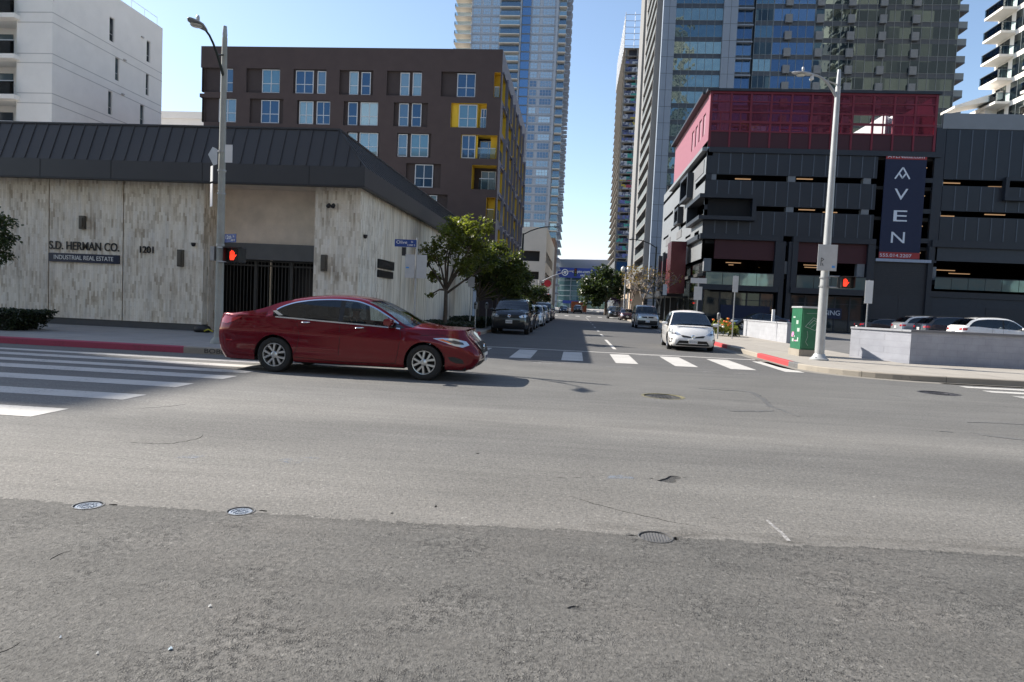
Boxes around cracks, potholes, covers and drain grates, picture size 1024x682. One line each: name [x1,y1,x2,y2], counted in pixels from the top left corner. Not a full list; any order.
manhole cover [638,531,673,543]
manhole cover [71,501,105,510]
crack [573,497,723,527]
manhole cover [226,506,255,516]
